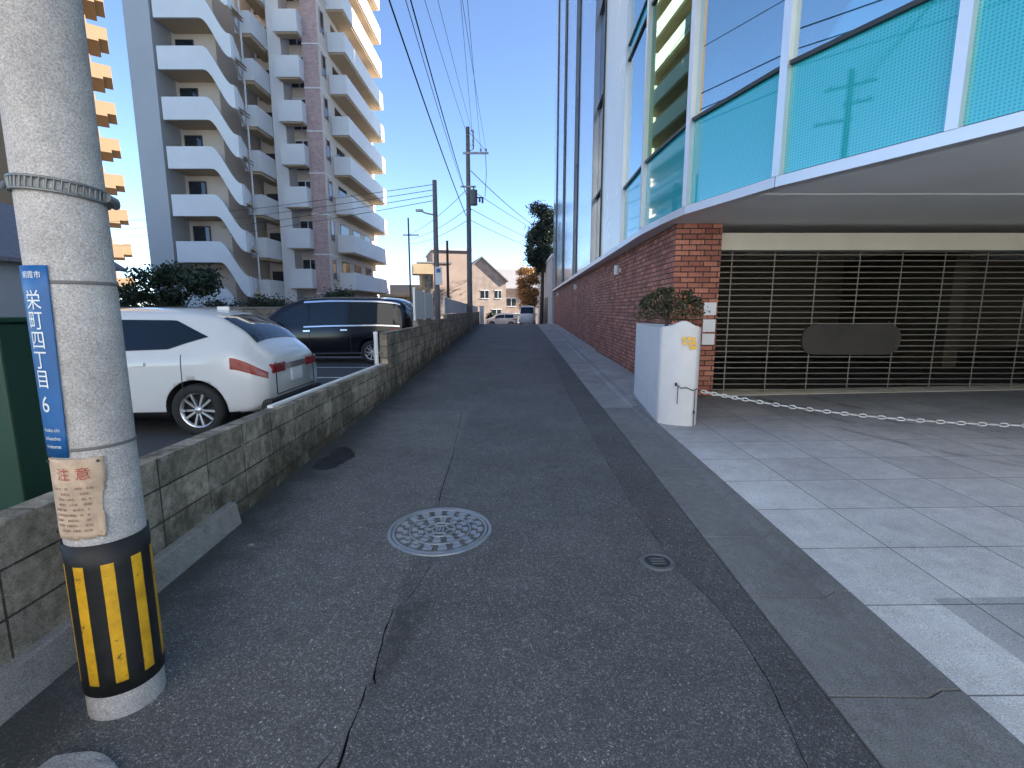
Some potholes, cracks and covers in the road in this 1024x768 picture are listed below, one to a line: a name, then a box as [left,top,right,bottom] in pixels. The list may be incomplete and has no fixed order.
manhole cover [387,507,492,556]
crack [318,610,393,768]
